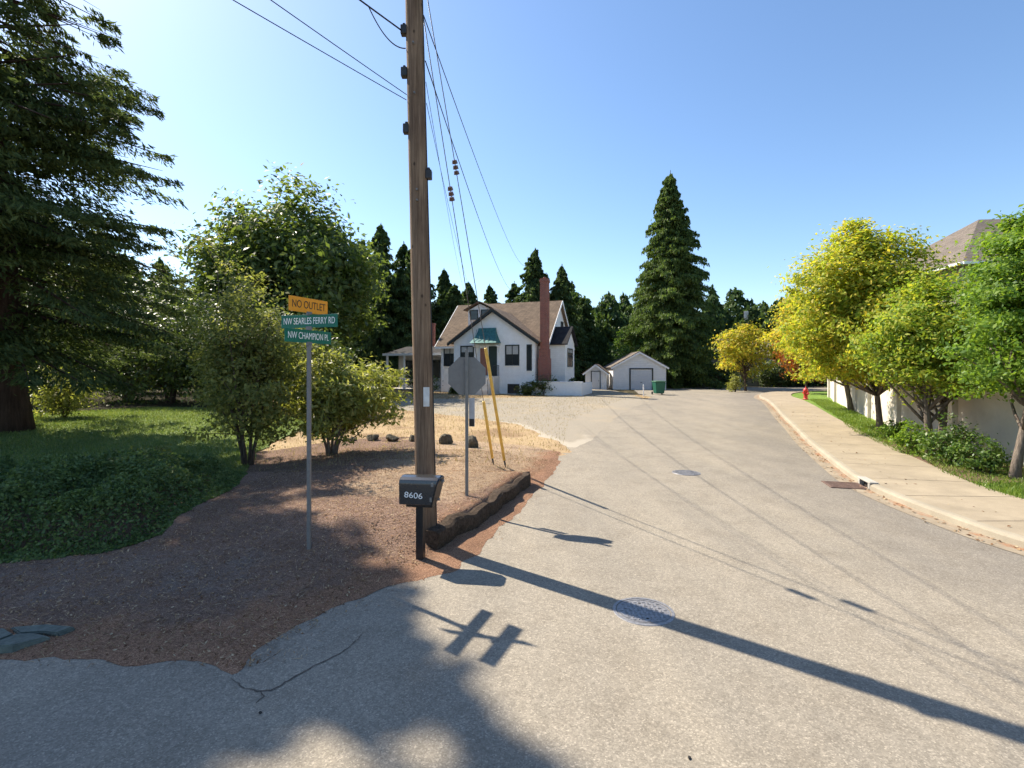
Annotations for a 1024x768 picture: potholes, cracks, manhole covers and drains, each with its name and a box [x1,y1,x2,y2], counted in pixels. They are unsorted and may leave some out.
crack [232,633,363,703]
drain grate [821,476,879,490]
manhole cover [612,597,675,626]
